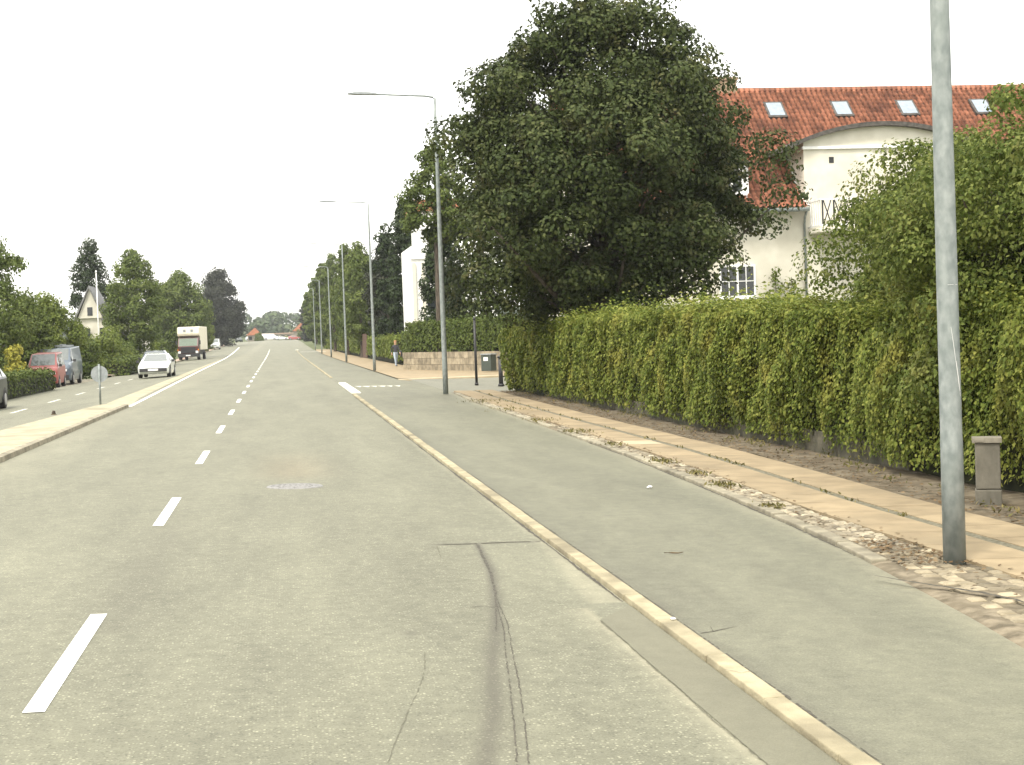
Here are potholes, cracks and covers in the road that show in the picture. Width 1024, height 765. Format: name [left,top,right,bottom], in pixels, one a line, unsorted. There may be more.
crack [356,398,885,765]
